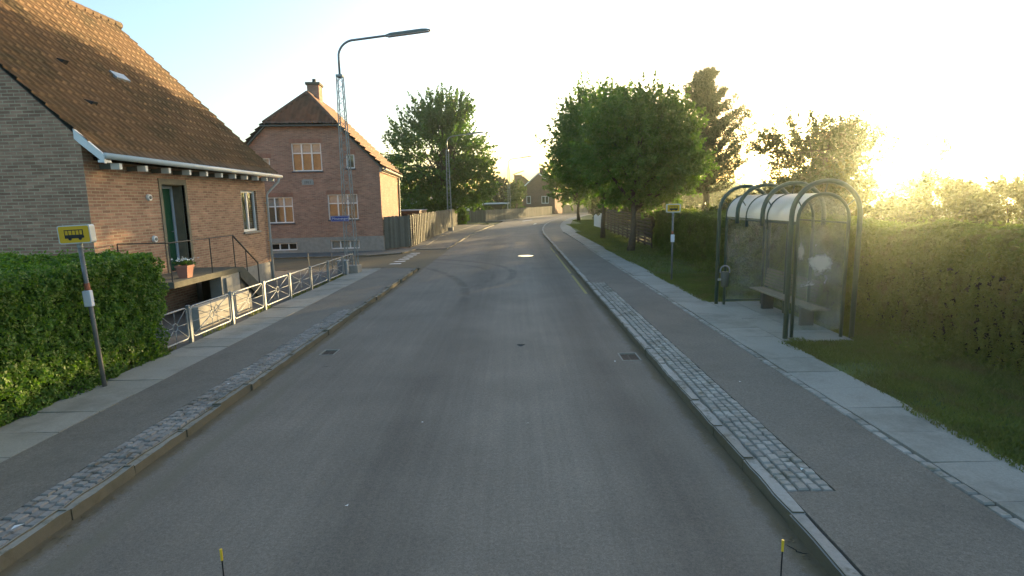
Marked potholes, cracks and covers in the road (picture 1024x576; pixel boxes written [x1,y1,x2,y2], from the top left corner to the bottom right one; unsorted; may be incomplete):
drain grate [618,353,641,361]
